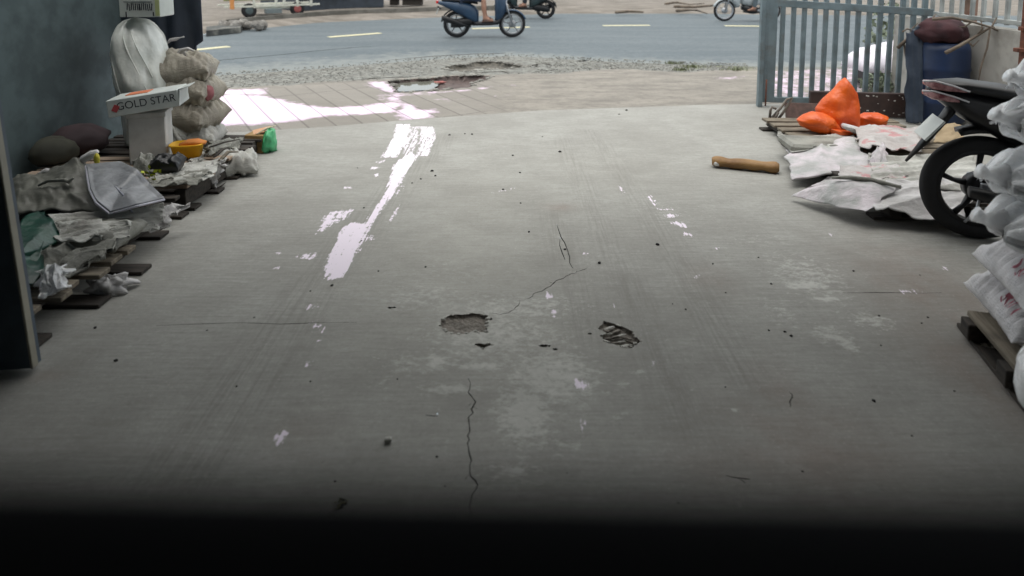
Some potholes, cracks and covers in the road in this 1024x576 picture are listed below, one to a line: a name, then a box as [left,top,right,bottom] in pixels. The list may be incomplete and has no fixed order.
pothole [387,73,495,93]
pothole [439,312,491,335]
crack [495,226,588,314]
crack [465,379,478,483]
pothole [441,59,531,72]
pothole [598,321,642,348]
